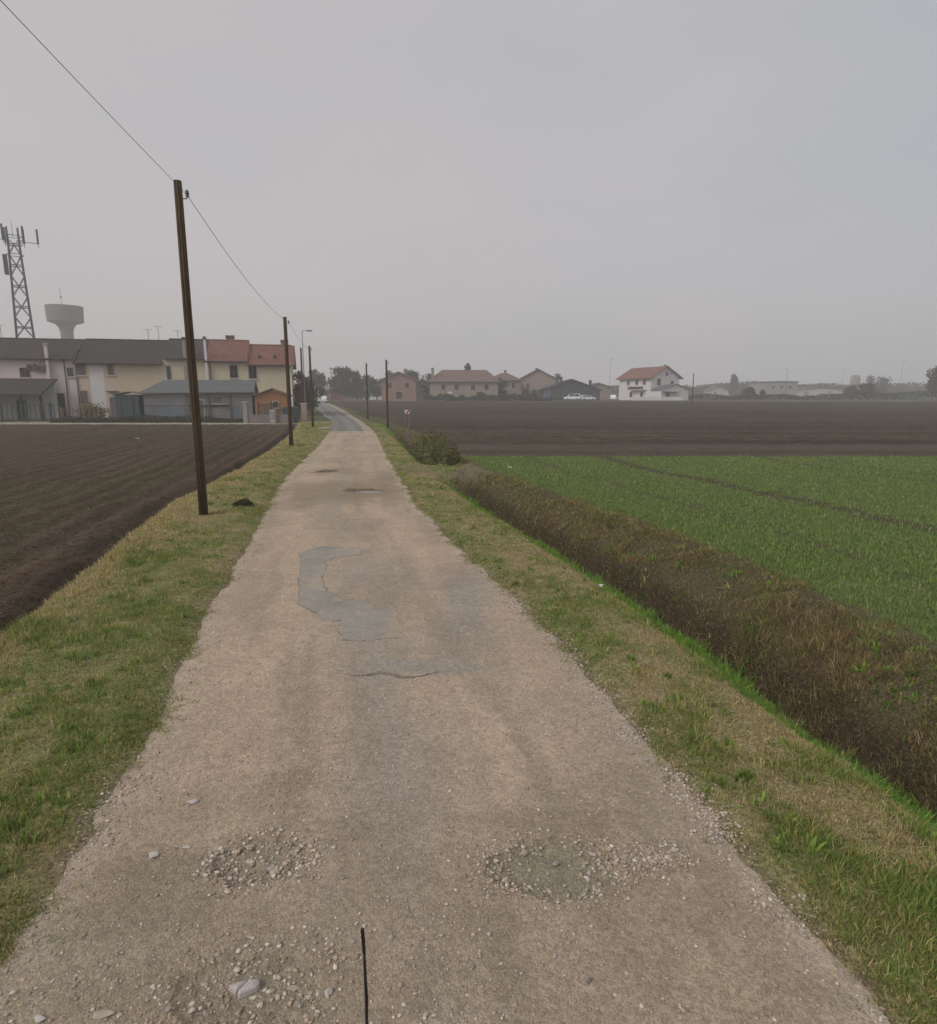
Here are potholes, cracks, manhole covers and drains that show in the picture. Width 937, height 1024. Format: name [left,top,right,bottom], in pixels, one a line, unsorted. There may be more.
pothole [169,821,345,905]
crack [343,670,456,679]
pothole [450,819,663,912]
